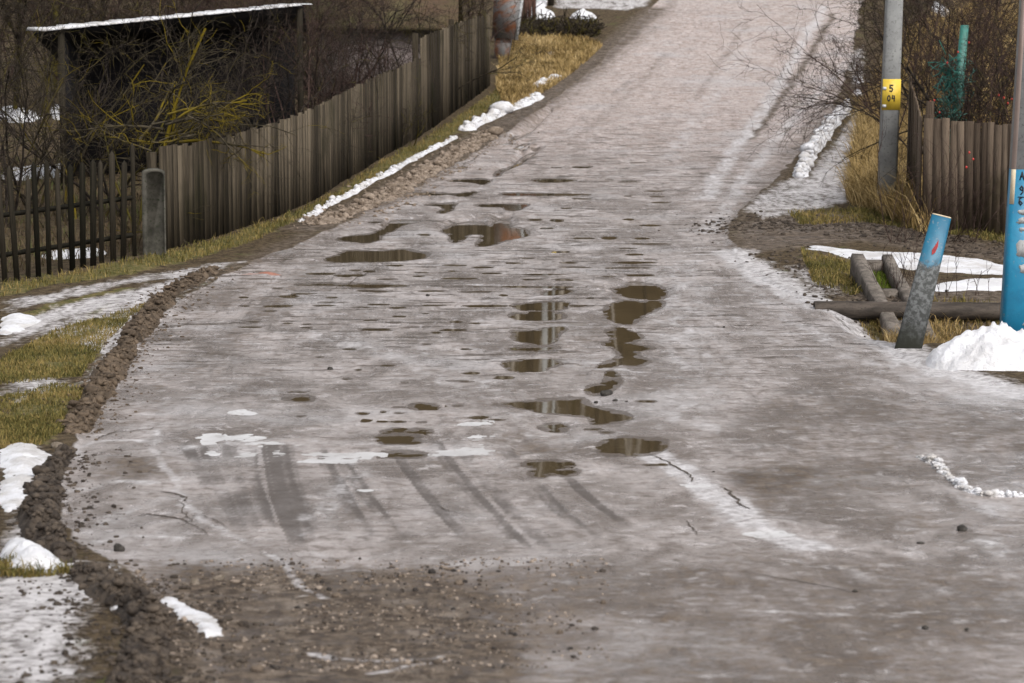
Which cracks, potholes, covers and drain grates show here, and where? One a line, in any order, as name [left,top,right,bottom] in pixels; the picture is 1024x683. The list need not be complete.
pothole [435,214,536,248]
pothole [596,297,674,328]
pothole [509,455,587,470]
pothole [534,288,581,298]
pothole [528,417,577,433]
pothole [494,356,570,375]
pothole [604,277,676,300]
pothole [483,393,643,426]
crack [138,491,225,535]
pothole [588,325,664,370]
crack [719,486,750,509]
crack [653,455,693,481]
